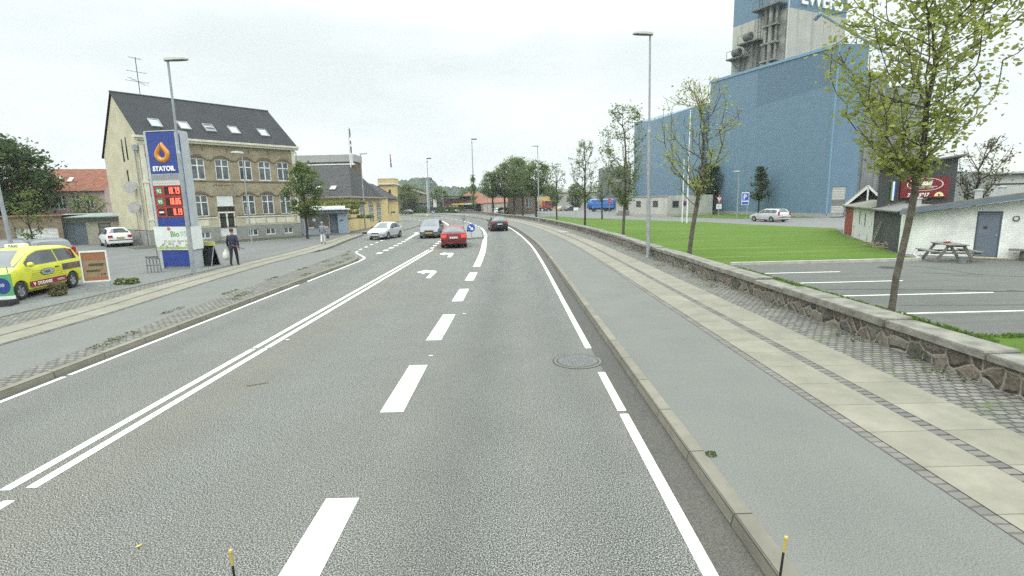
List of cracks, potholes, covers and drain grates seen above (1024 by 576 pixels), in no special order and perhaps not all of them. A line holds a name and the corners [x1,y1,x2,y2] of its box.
manhole cover [553,353,603,369]
